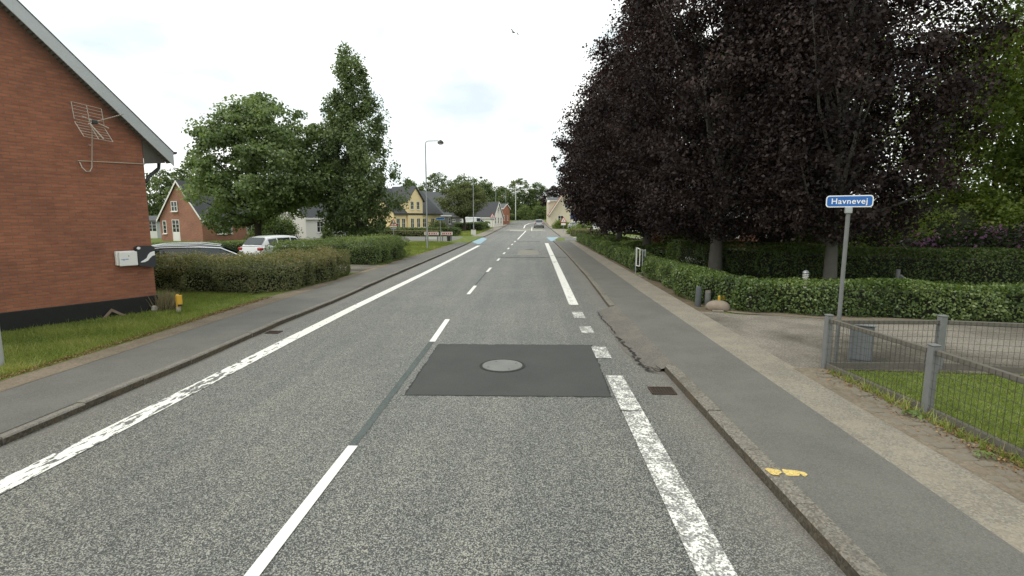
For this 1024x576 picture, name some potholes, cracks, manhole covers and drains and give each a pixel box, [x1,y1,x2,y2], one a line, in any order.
manhole cover [480,359,525,372]
drain grate [647,386,677,395]
crack [598,312,659,372]
